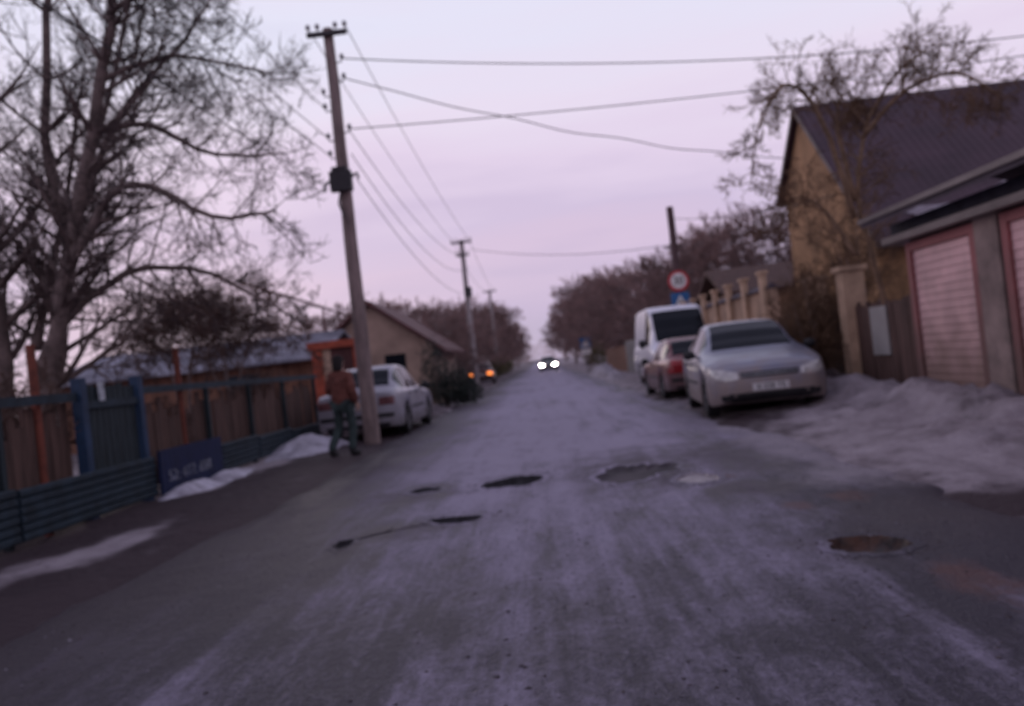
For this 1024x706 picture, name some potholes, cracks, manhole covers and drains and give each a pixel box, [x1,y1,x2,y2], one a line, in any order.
pothole [474,474,551,491]
pothole [402,486,449,495]
crack [356,523,431,539]
pothole [588,461,689,485]
pothole [419,513,491,525]
pothole [814,532,927,557]
